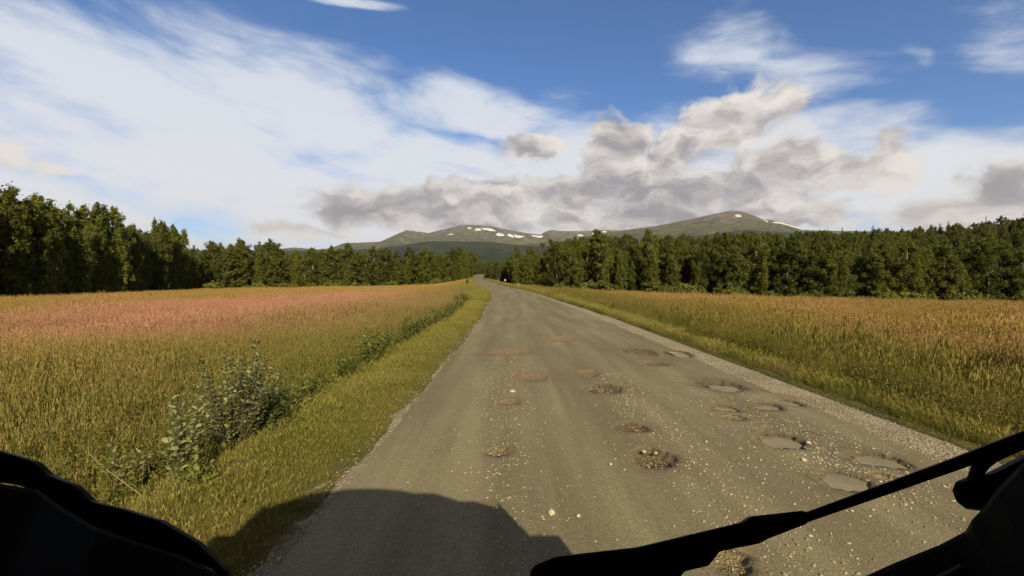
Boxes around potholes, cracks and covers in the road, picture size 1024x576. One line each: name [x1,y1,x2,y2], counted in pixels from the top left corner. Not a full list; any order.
pothole [495,398,524,406]
pothole [617,348,661,356]
pothole [703,547,767,576]
pothole [739,401,790,413]
pothole [806,467,880,496]
pothole [515,373,552,382]
pothole [623,444,687,473]
pothole [479,444,517,460]
pothole [658,350,696,358]
pothole [688,379,755,394]
pothole [574,369,604,379]
pothole [703,403,746,414]
